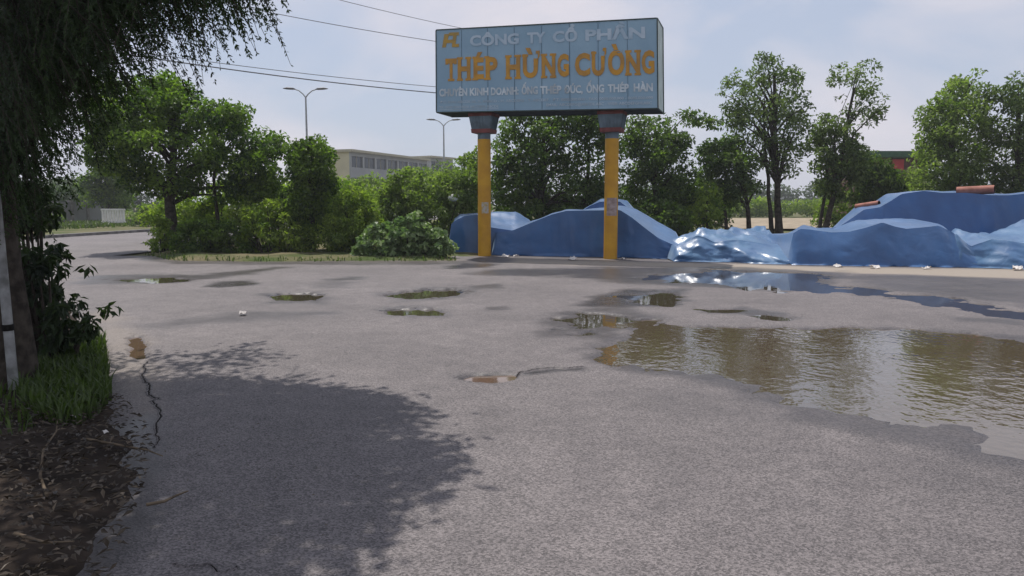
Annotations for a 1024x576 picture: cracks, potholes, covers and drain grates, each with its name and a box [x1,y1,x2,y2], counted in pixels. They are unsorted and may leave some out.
pothole [453,370,527,384]
pothole [364,305,464,318]
pothole [253,291,341,302]
crack [516,366,584,377]
crack [139,361,165,447]
pothole [118,332,156,361]
pothole [360,287,491,301]
